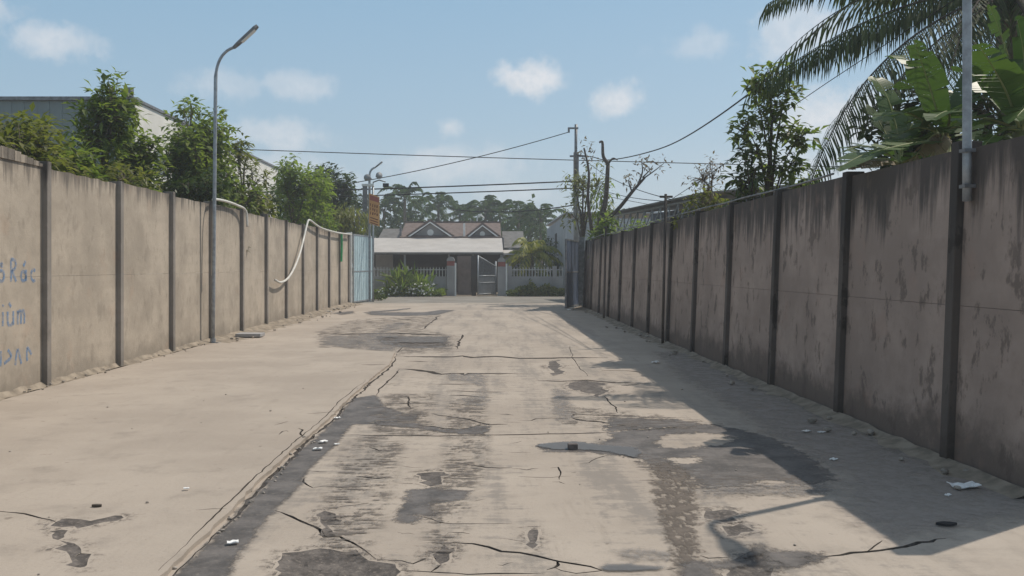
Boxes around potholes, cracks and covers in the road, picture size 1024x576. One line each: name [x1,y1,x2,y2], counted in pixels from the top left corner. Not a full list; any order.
pothole [524,526,541,549]
pothole [427,545,463,567]
crack [0,511,55,522]
crack [827,538,946,557]
pothole [415,470,450,488]
crack [158,315,715,576]
